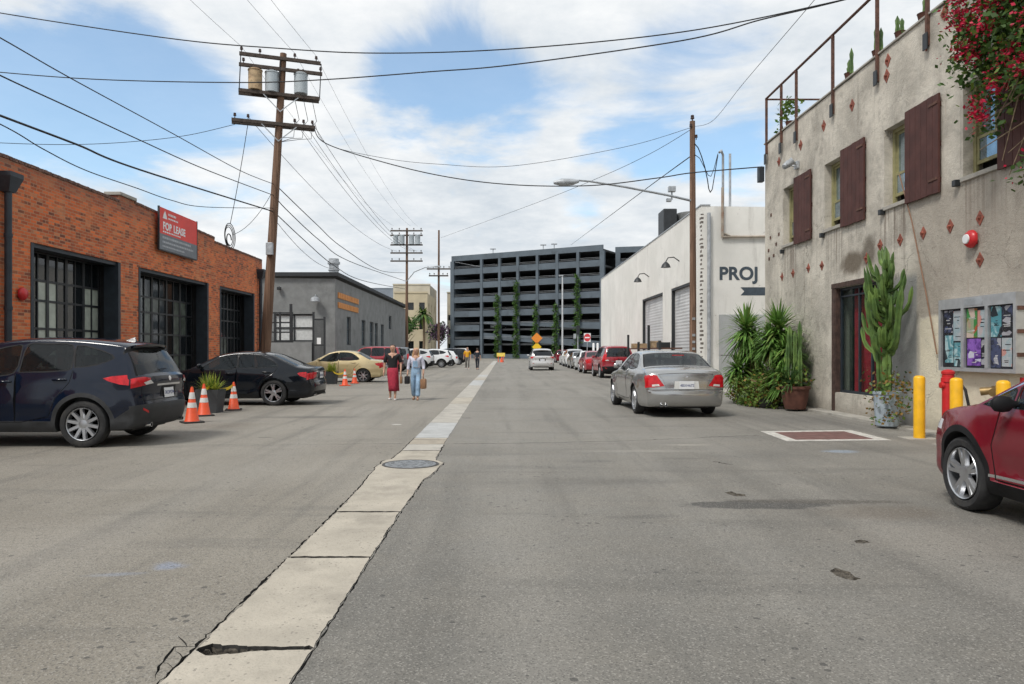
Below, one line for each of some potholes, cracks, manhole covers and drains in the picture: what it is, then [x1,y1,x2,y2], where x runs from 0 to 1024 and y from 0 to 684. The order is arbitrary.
crack [155,437,445,684]
pothole [202,647,297,656]
pothole [831,568,860,580]
manhole cover [382,460,439,469]
